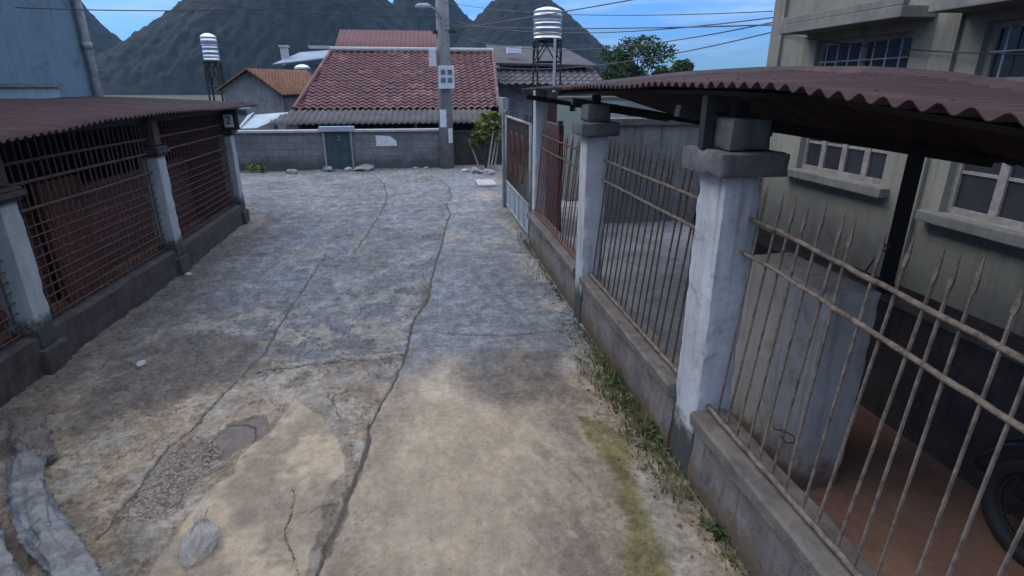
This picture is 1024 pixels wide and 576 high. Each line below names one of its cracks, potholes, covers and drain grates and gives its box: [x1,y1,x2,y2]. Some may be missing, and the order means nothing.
crack [95,175,569,576]
pothole [210,417,268,461]
